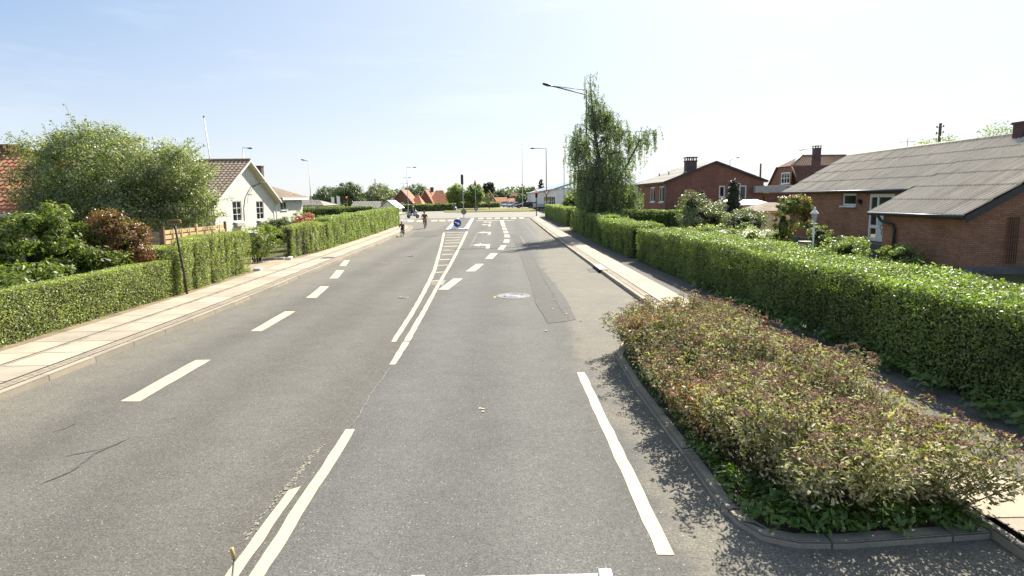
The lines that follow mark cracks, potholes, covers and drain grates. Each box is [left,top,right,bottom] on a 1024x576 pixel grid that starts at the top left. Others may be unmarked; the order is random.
crack [43,438,129,483]
